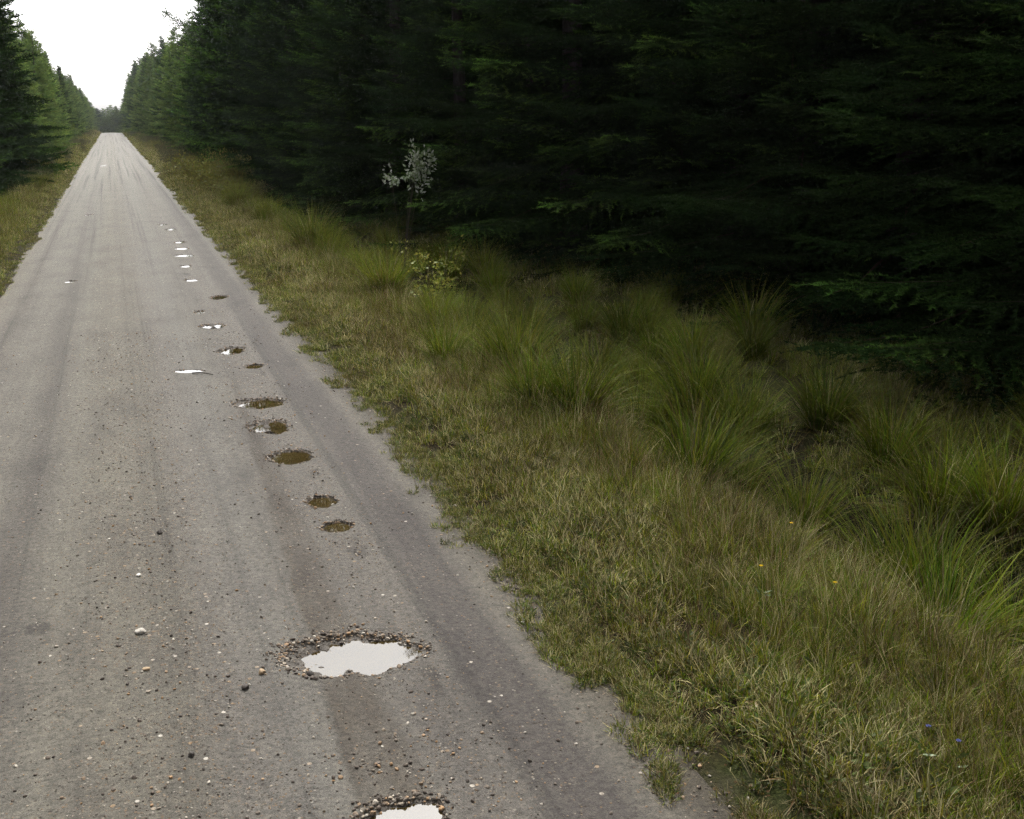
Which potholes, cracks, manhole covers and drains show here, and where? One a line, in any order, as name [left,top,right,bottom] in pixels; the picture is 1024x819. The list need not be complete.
pothole [279,632,431,678]
pothole [321,521,352,532]
pothole [248,419,291,434]
pothole [234,398,288,409]
